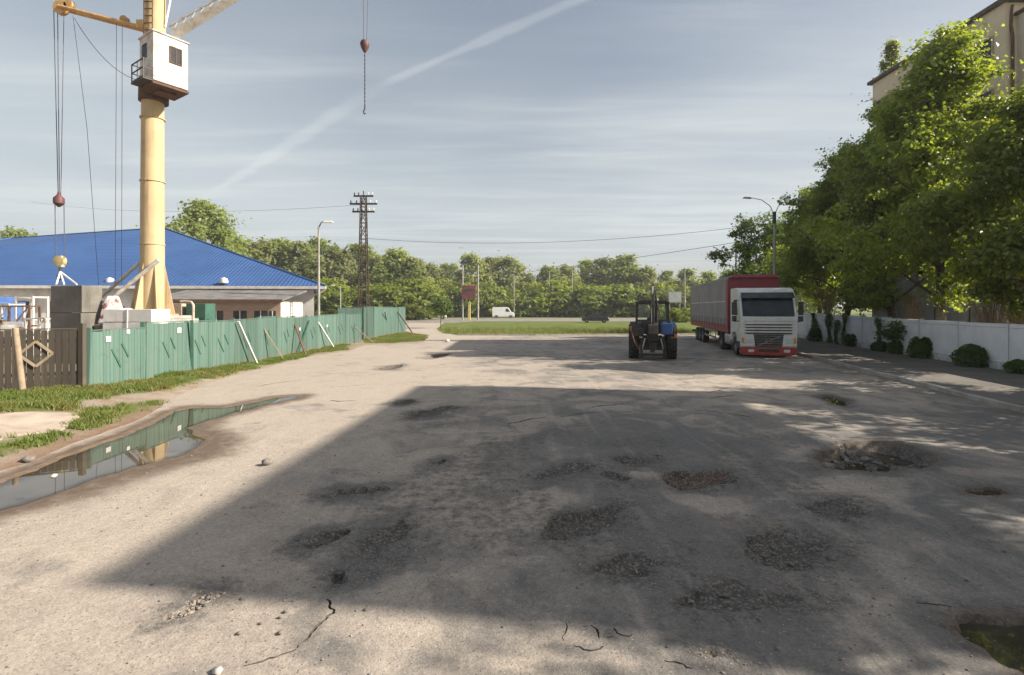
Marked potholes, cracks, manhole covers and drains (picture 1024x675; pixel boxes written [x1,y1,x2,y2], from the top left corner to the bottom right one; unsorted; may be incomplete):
pothole [661,468,745,491]
pothole [963,487,1008,496]
pothole [813,440,938,472]
pothole [530,461,600,481]
pothole [319,485,391,499]
pothole [668,579,830,615]
pothole [289,528,351,552]
pothole [949,613,1024,674]
crack [562,623,633,651]
pothole [805,498,884,522]
pothole [349,518,411,578]
pothole [744,530,852,571]
